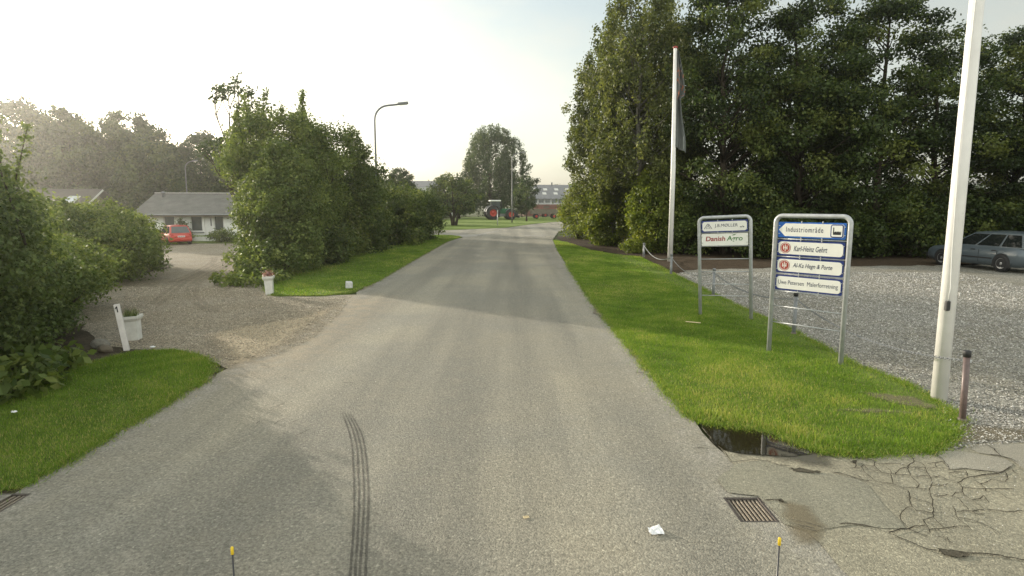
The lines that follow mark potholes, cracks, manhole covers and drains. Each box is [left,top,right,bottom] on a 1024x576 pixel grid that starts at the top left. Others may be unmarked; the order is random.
crack [832,446,1024,560]
drain grate [723,497,779,522]
drain grate [0,494,30,512]
